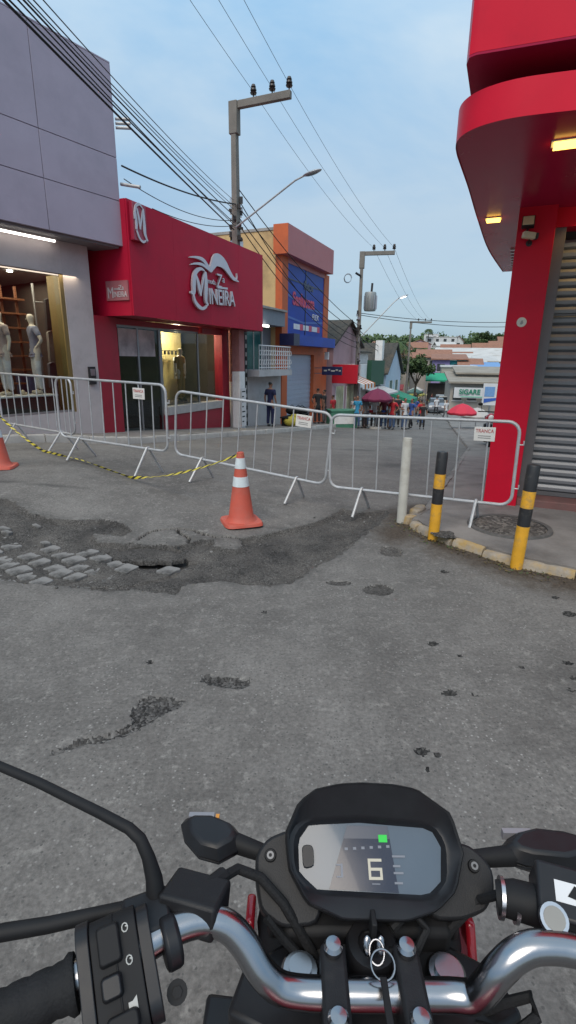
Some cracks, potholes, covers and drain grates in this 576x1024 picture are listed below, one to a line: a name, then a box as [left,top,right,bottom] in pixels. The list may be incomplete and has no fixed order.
pothole [0,498,389,595]
pothole [50,696,186,756]
pothole [200,674,250,689]
manhole cover [467,514,553,540]
pothole [380,546,404,557]
pothole [362,584,394,596]
